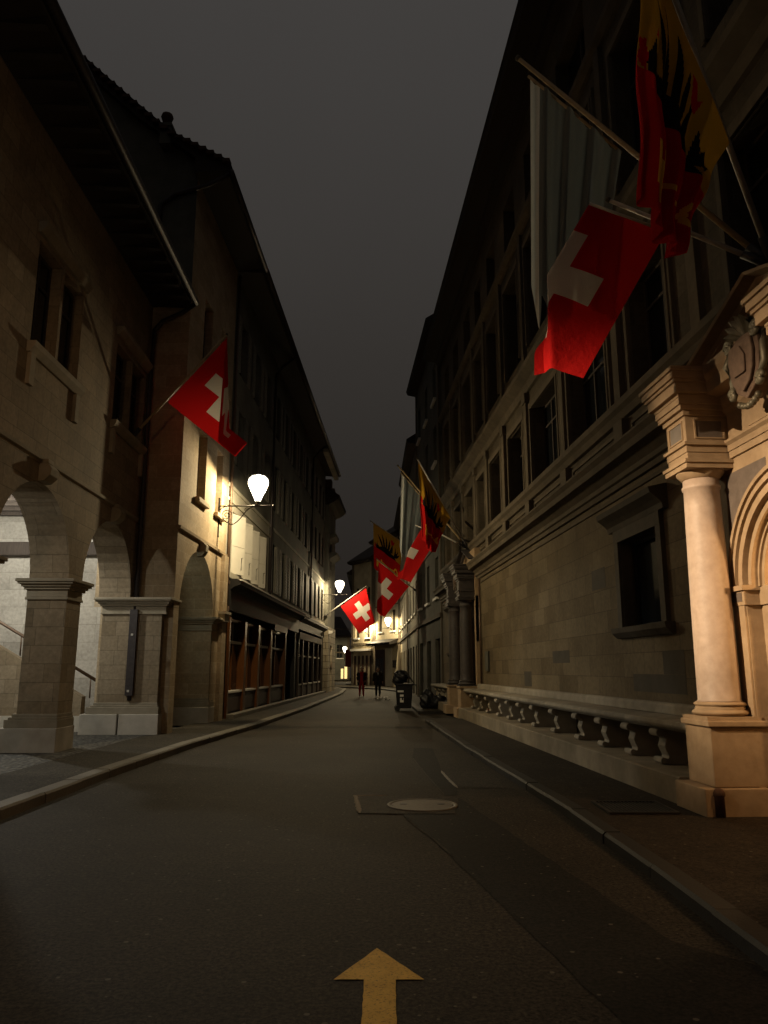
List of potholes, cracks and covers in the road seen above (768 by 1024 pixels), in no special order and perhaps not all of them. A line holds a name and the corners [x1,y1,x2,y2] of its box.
manhole cover [387,798,458,812]
